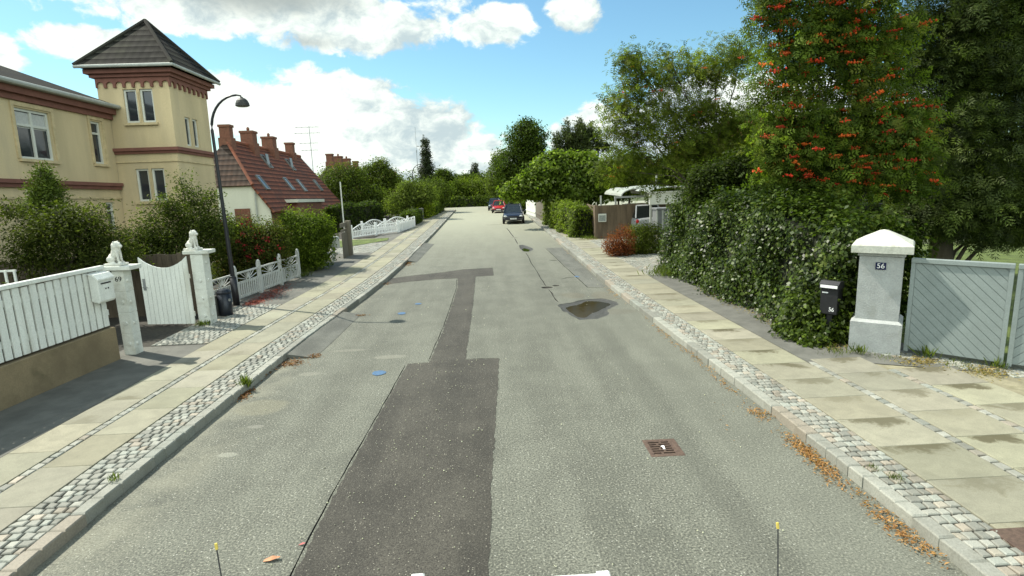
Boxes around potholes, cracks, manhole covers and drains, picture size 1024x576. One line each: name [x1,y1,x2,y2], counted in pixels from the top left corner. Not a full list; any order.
drain grate [642,438,685,457]
crack [507,229,591,302]
pothole [558,298,619,320]
